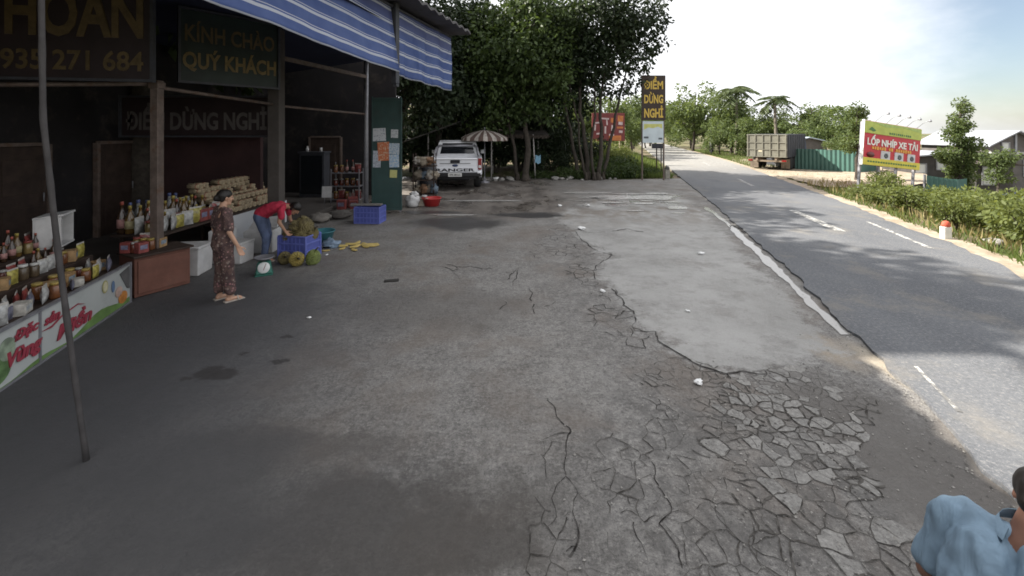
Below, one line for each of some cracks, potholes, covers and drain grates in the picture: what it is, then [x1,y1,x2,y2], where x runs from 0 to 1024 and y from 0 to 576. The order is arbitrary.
crack [440,248,556,314]
crack [523,229,914,576]
